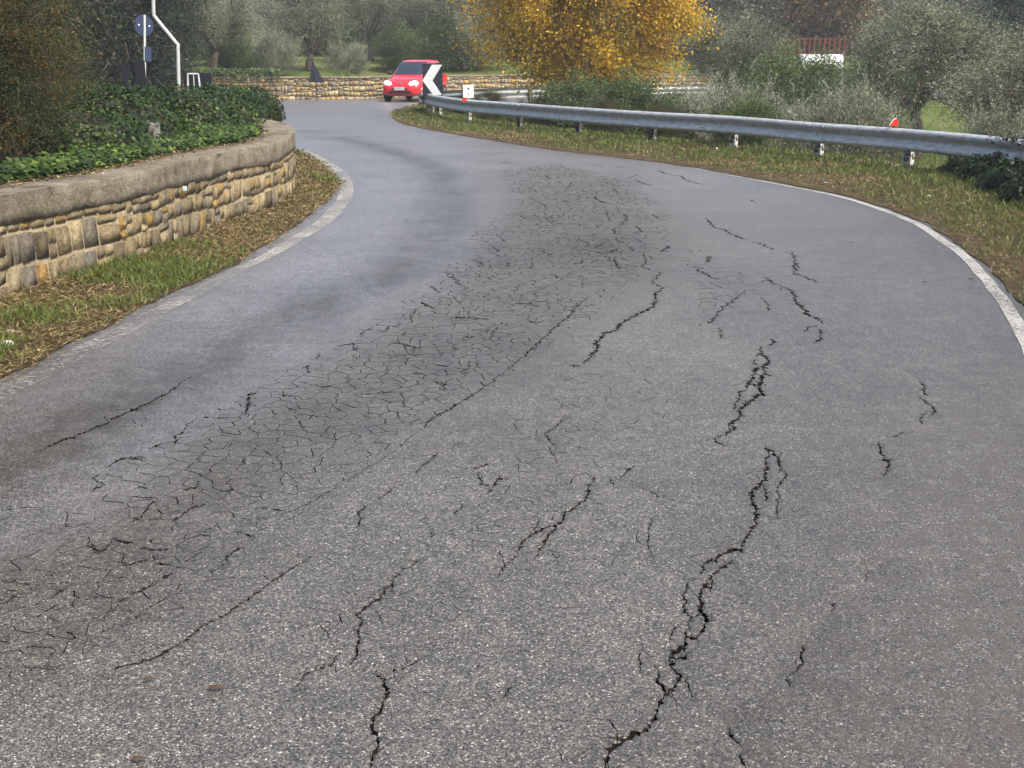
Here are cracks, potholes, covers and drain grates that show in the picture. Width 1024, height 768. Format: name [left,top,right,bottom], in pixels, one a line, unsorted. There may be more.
crack [502,162,830,368]
crack [785,574,867,687]
crack [297,354,671,768]
crack [0,212,628,677]
crack [878,382,937,476]
crack [552,339,788,768]
